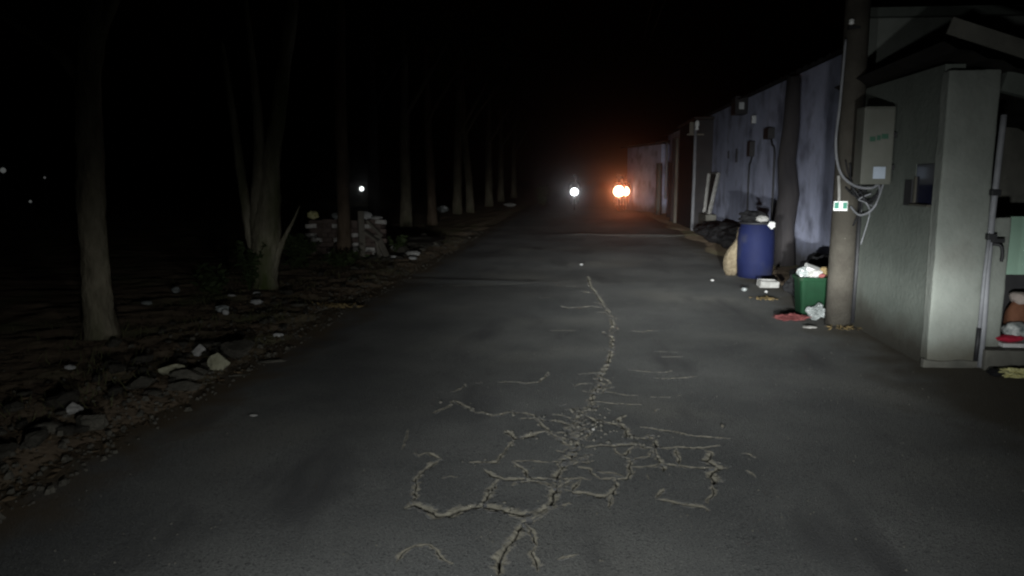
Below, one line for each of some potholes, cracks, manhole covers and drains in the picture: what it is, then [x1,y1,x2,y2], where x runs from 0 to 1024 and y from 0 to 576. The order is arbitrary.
crack [395,262,757,576]
